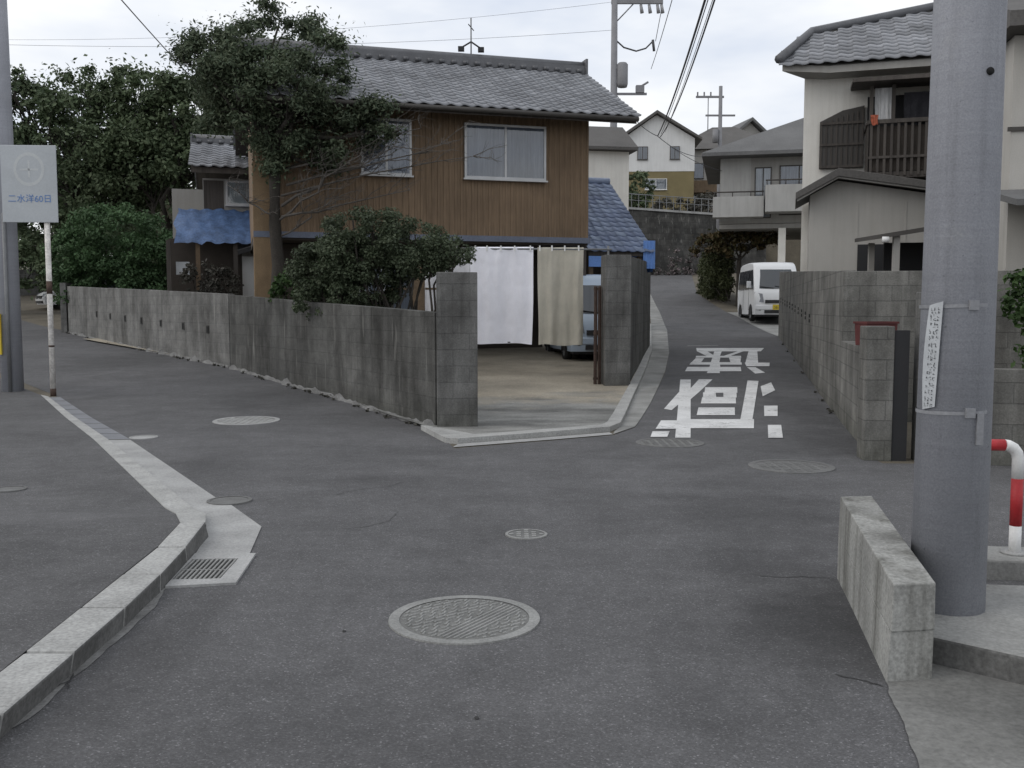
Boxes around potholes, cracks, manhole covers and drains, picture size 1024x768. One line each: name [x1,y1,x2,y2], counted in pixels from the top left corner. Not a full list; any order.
utility cover [206,496,252,506]
manhole cover [636,438,705,448]
manhole cover [388,595,540,645]
utility cover [505,529,547,540]
manhole cover [212,416,280,425]
drain grate [165,553,256,589]
manhole cover [748,459,836,474]
